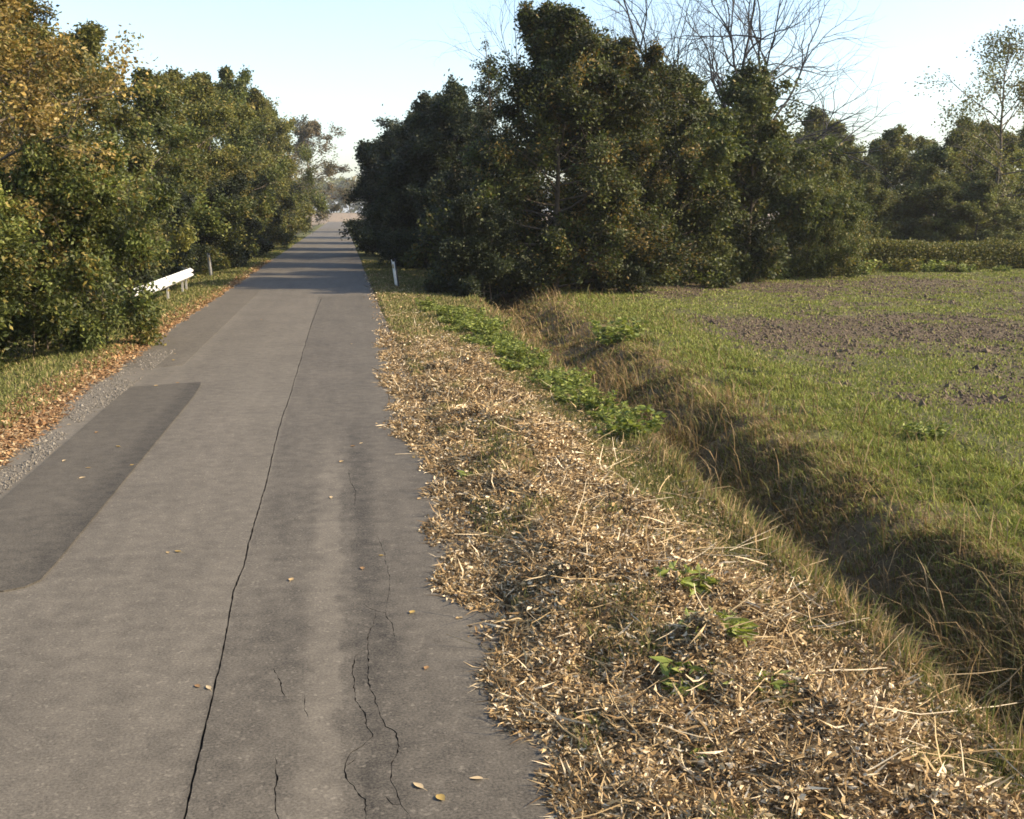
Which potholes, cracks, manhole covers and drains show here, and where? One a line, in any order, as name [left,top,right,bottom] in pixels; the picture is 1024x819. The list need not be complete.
crack [183,300,321,819]
crack [344,541,411,819]
